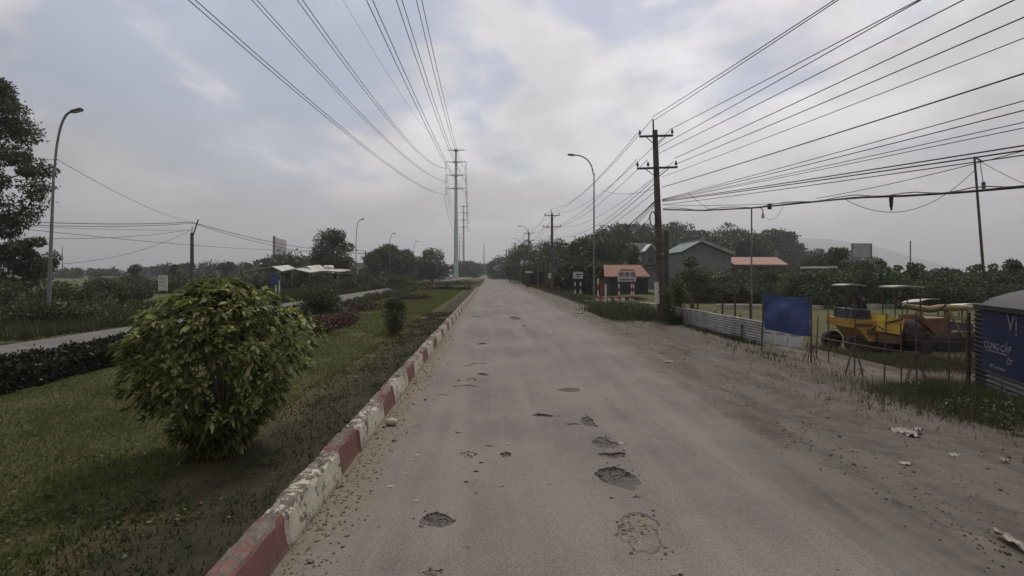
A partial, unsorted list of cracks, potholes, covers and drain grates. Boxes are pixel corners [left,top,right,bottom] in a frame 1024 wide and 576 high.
pothole [614,505,674,560]
pothole [412,510,456,528]
pothole [592,462,642,496]
pothole [591,434,627,450]
pothole [598,450,626,459]
pothole [581,414,598,427]
